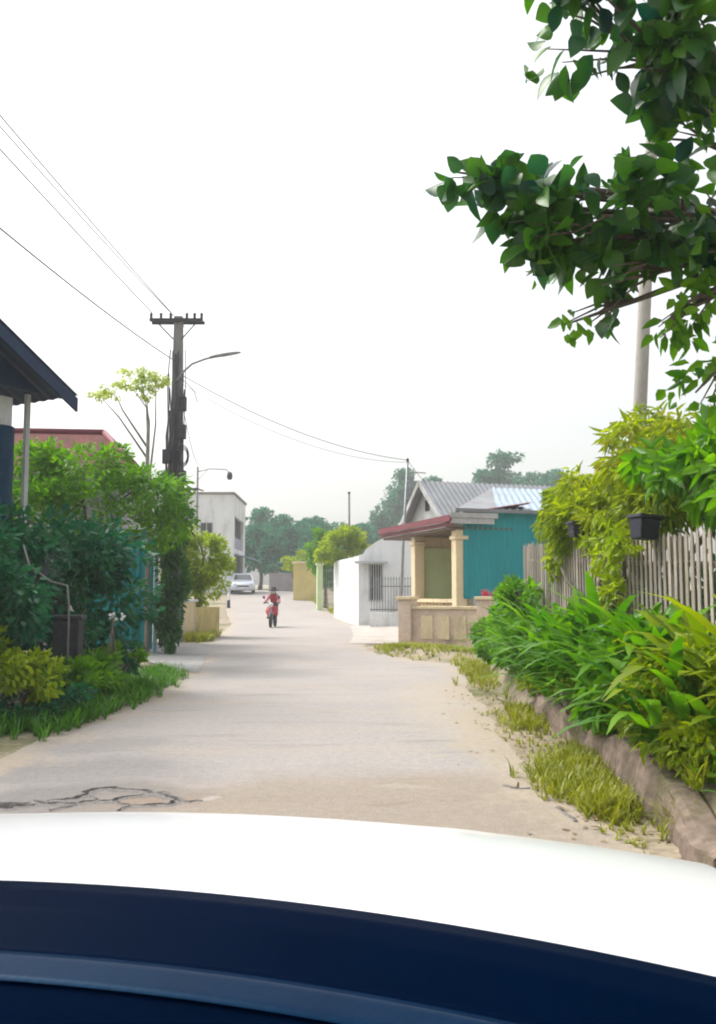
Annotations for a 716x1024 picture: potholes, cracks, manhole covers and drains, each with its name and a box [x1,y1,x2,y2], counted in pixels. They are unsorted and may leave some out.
crack [27,786,203,811]
